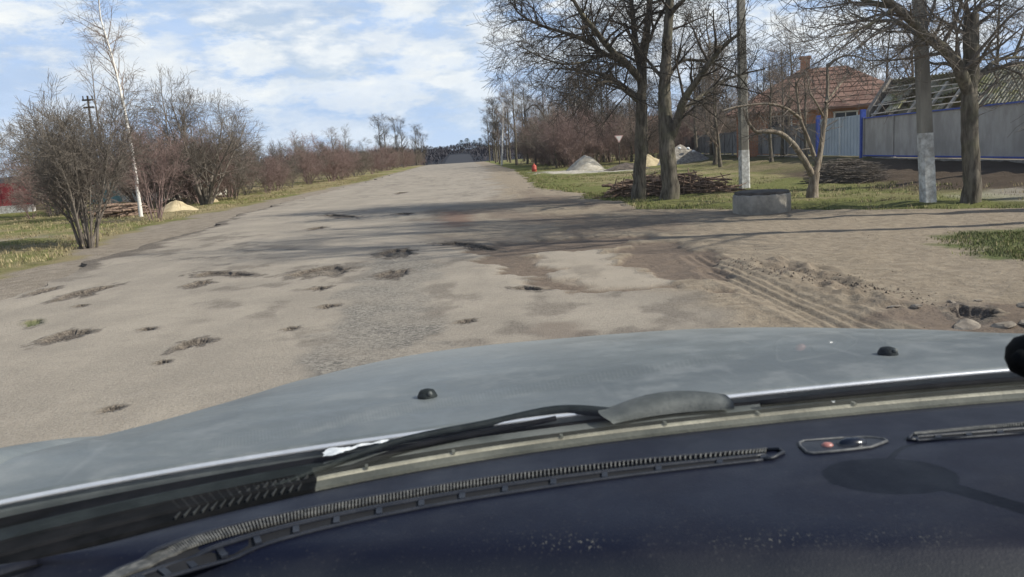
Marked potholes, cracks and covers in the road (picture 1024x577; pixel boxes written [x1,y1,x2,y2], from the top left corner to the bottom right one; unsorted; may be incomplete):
pothole [280,265,356,279]
pothole [937,303,1011,323]
pothole [276,325,305,333]
pothole [434,241,500,251]
pothole [45,284,120,303]
pothole [89,403,135,416]
pothole [148,358,179,367]
pothole [31,327,101,346]
pothole [174,279,219,289]
pothole [368,268,414,280]
pothole [310,303,347,311]
pothole [372,248,419,259]
